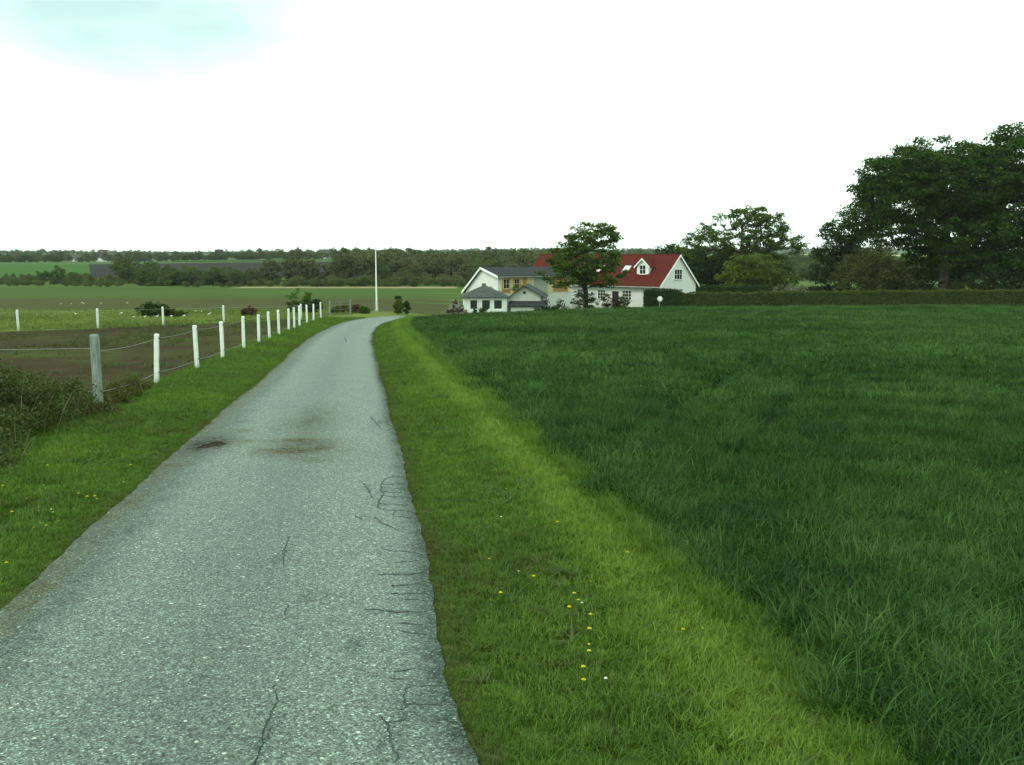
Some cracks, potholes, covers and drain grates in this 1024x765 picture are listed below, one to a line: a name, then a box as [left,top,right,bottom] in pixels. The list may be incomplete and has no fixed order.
crack [253,685,279,765]
crack [355,476,417,530]
crack [364,549,427,636]
crack [381,668,446,762]
